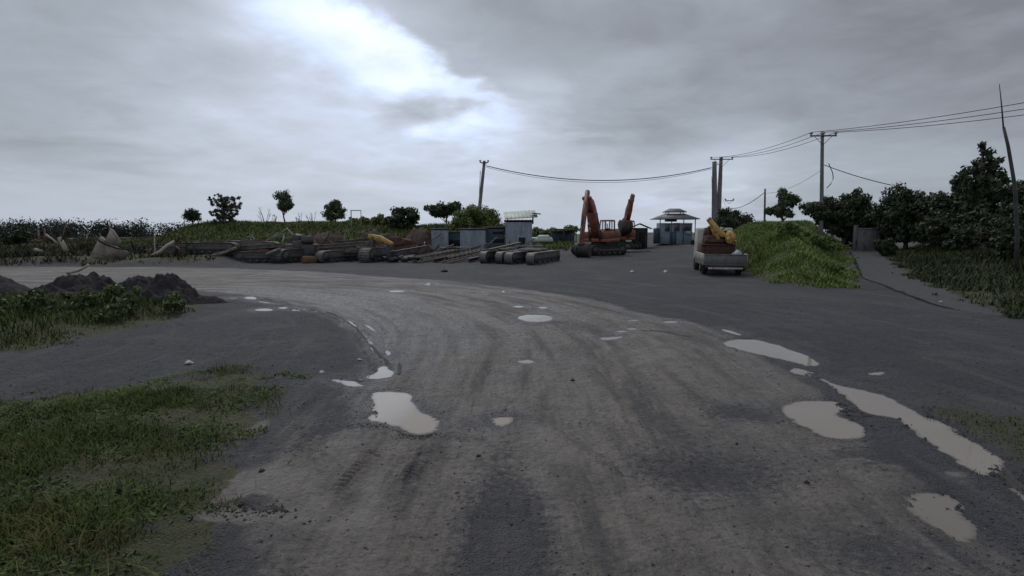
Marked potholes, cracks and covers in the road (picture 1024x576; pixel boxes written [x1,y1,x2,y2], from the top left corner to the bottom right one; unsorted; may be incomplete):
pothole [805,373,1017,486]
pothole [886,485,998,549]
pothole [780,365,826,379]
pothole [514,314,557,322]
pothole [324,376,373,388]
pothole [357,363,400,381]
pothole [362,389,449,436]
pothole [718,338,826,367]
pothole [771,397,877,443]
pothole [479,413,524,429]
